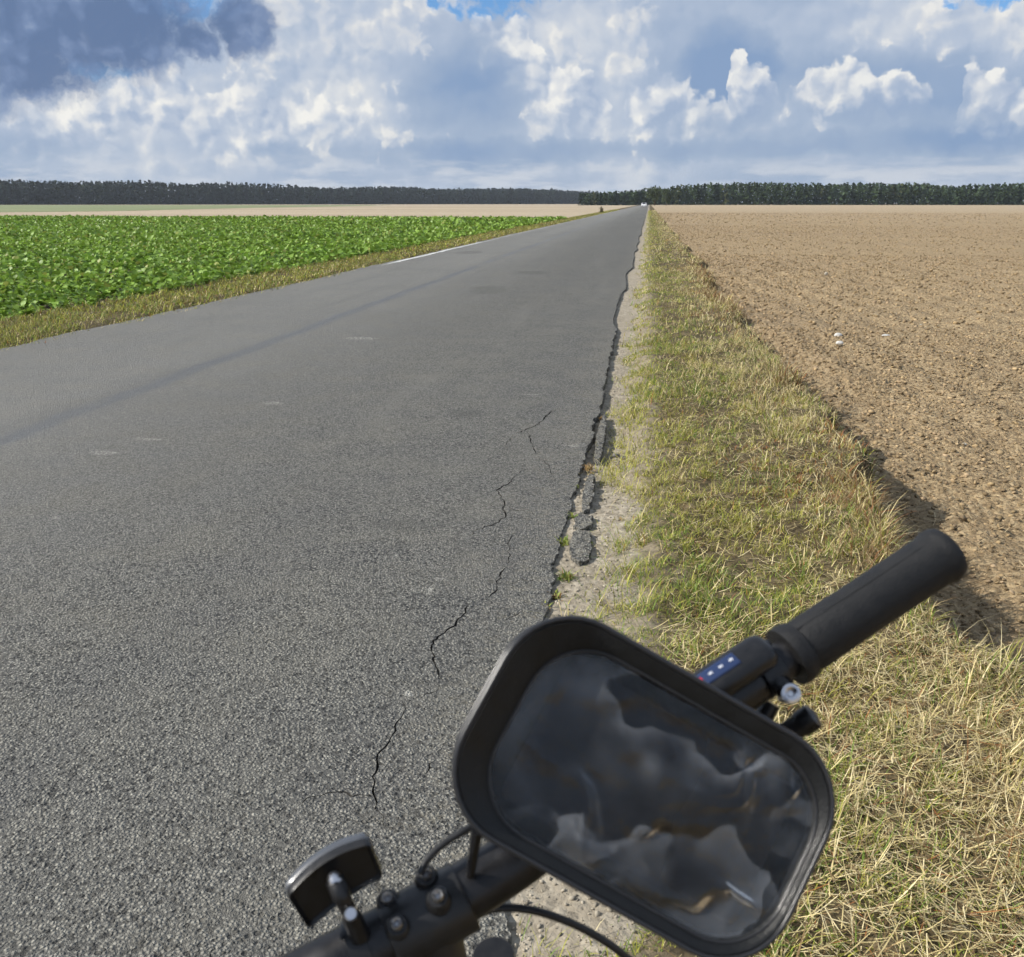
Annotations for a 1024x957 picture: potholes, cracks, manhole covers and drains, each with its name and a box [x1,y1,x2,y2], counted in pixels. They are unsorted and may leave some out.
crack [301,702,406,826]
crack [427,409,557,694]
